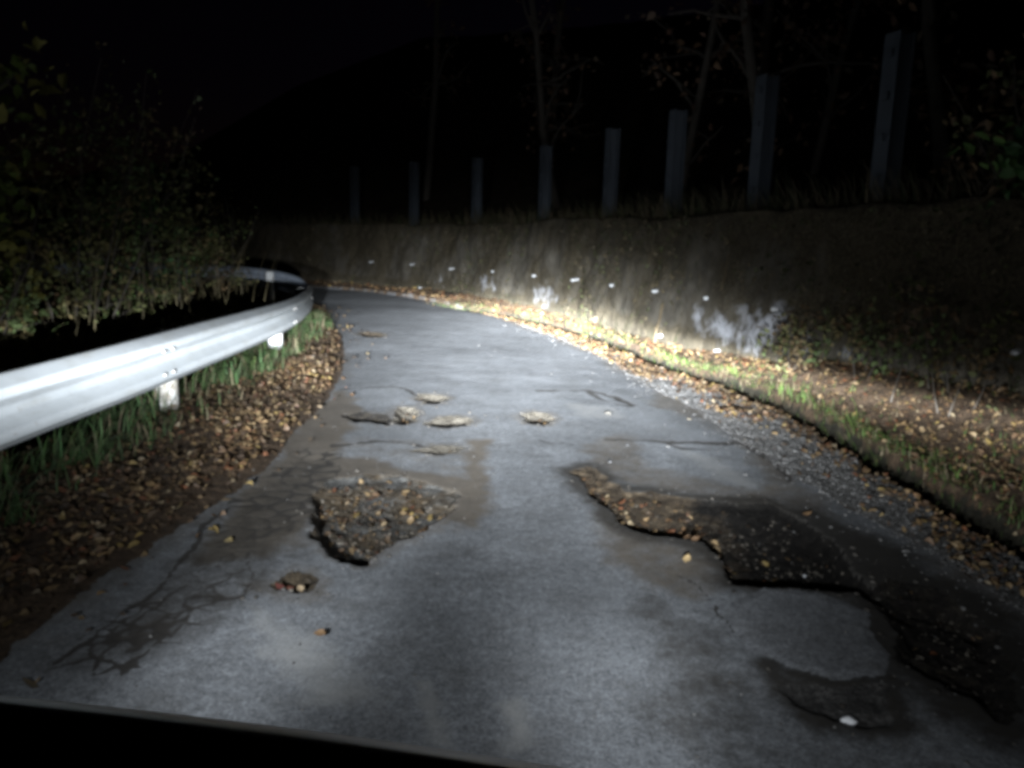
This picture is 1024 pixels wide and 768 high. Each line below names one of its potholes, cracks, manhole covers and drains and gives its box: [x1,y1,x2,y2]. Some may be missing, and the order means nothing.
pothole [390,407,420,425]
pothole [422,416,473,428]
pothole [569,466,872,596]
pothole [341,411,392,426]
crack [49,439,427,677]
crack [603,438,794,482]
pothole [309,473,461,567]
pothole [520,412,557,426]
pothole [269,571,319,594]
pothole [415,394,449,404]
